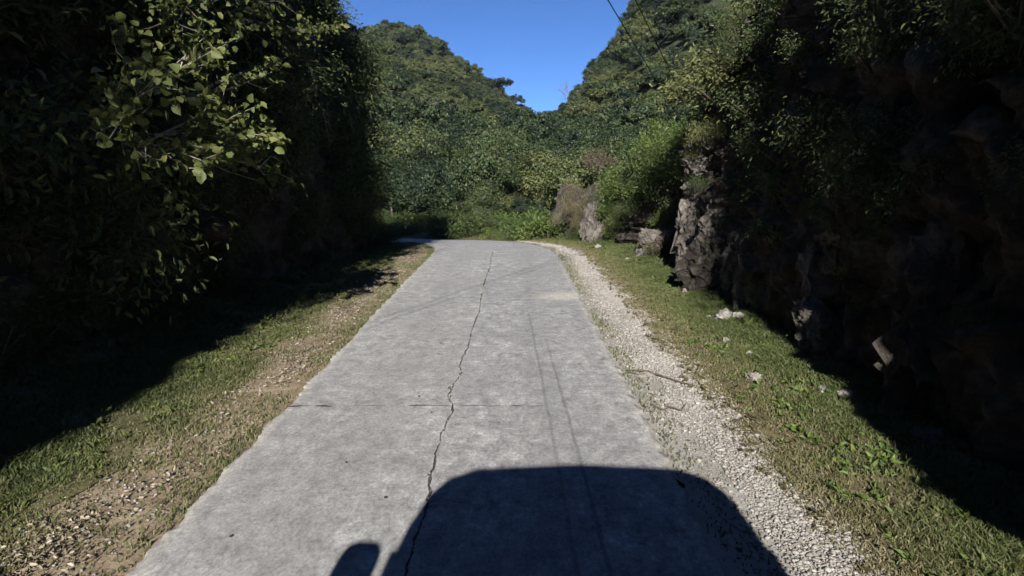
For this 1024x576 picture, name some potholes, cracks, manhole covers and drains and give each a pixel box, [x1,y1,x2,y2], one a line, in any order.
crack [289,252,547,576]
